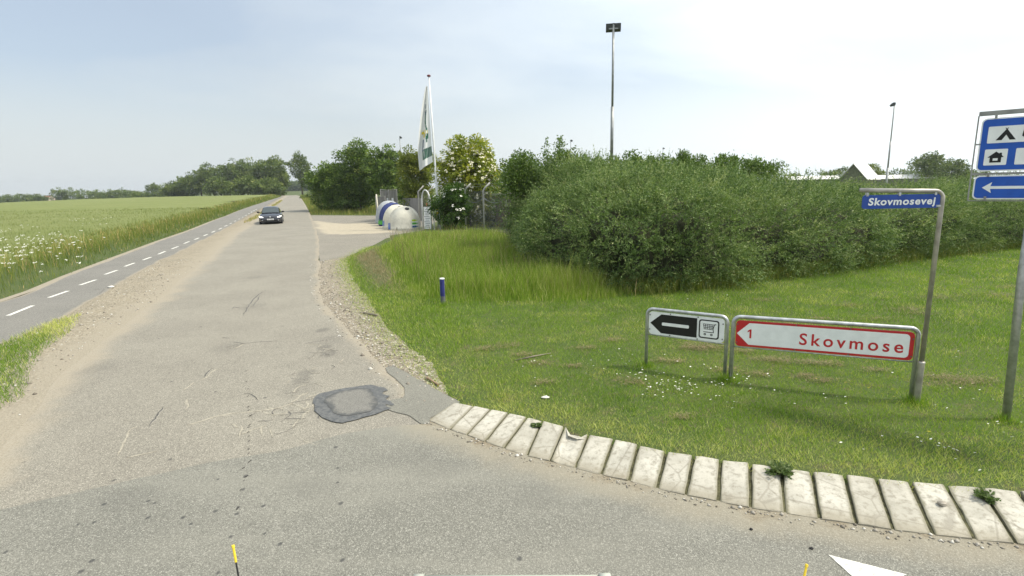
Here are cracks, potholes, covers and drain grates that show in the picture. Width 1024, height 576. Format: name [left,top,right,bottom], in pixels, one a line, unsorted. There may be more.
crack [117,406,164,458]
